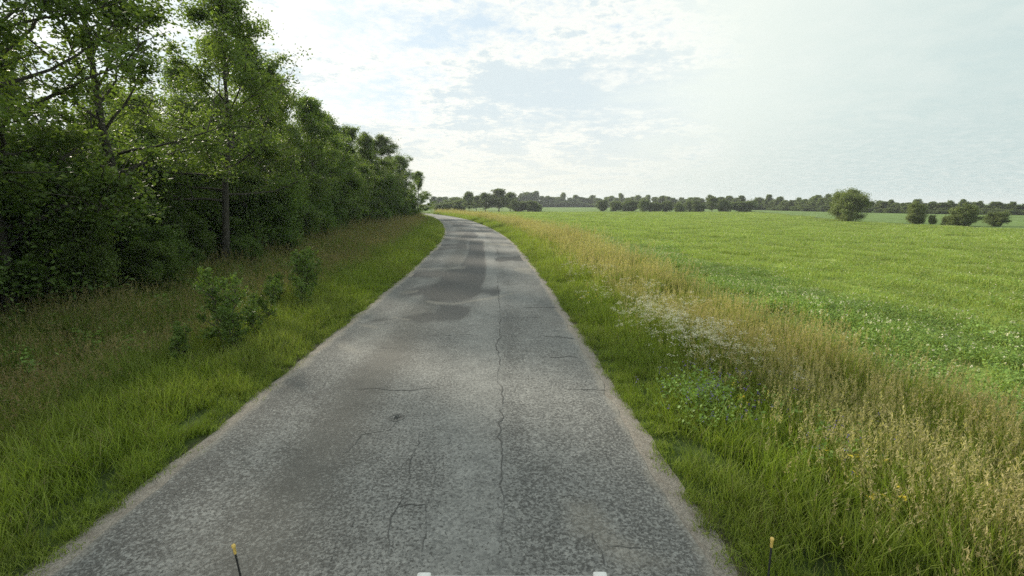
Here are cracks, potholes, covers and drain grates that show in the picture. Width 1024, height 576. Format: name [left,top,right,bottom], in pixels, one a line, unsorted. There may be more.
crack [496,275,505,550]
crack [388,440,436,550]
